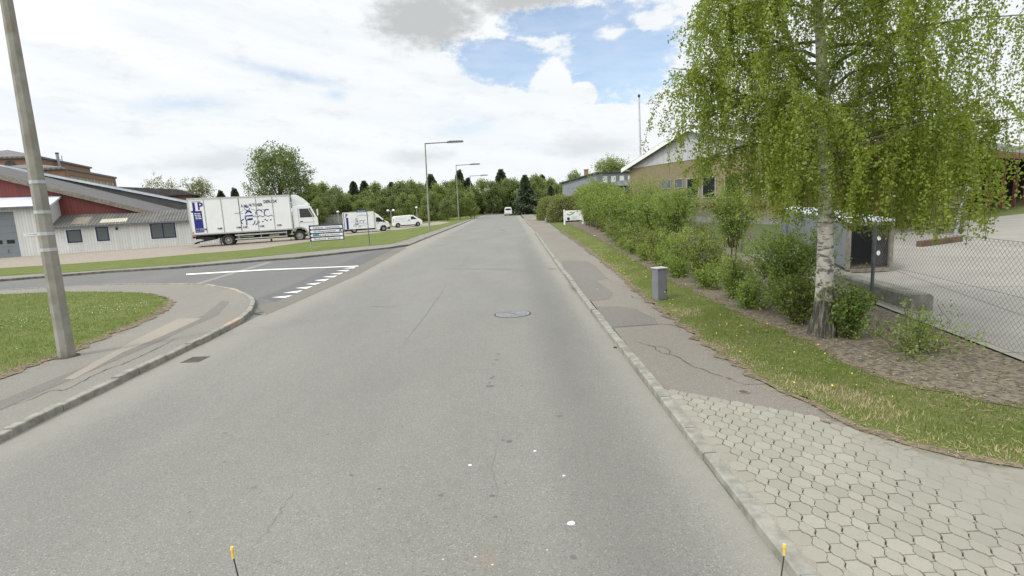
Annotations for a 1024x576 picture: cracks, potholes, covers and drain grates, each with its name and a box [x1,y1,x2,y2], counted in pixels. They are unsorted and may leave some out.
manhole cover [494,310,531,318]
